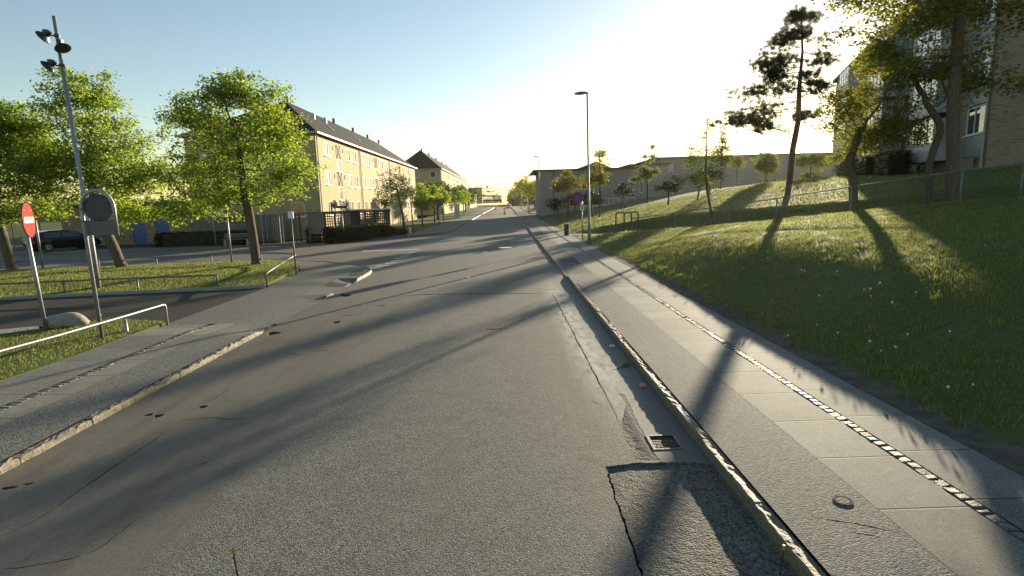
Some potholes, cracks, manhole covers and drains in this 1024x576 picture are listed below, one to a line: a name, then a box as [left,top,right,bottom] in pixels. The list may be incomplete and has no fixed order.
drain grate [645,434,684,450]
crack [815,517,894,538]
crack [9,389,250,533]
utility cover [832,495,854,506]
crack [8,519,137,569]
